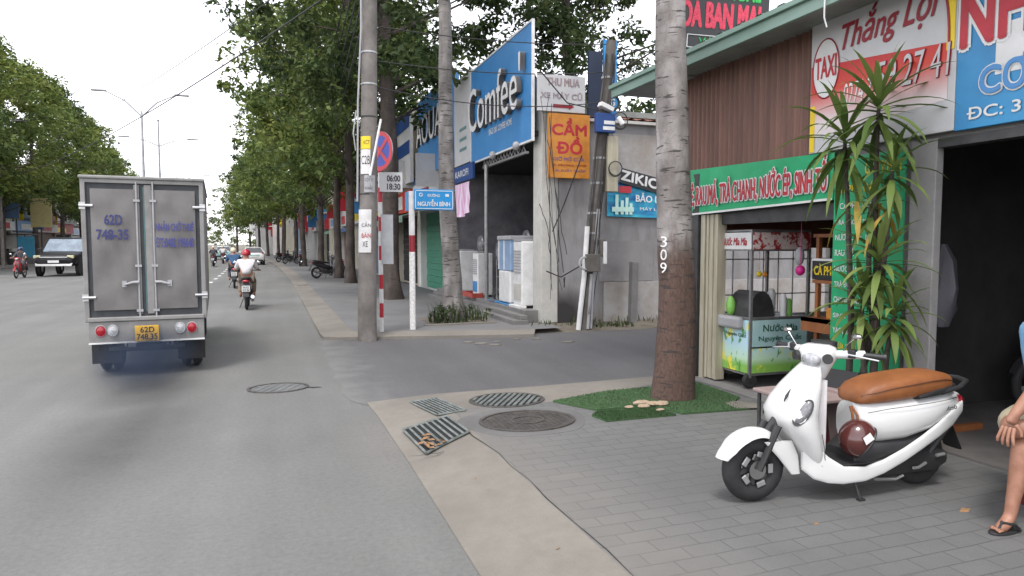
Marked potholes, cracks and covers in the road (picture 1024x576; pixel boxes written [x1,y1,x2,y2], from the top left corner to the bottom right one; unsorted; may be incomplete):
drain grate [410,397,466,416]
manhole cover [479,410,575,432]
drain grate [402,415,470,455]
manhole cover [247,382,309,393]
